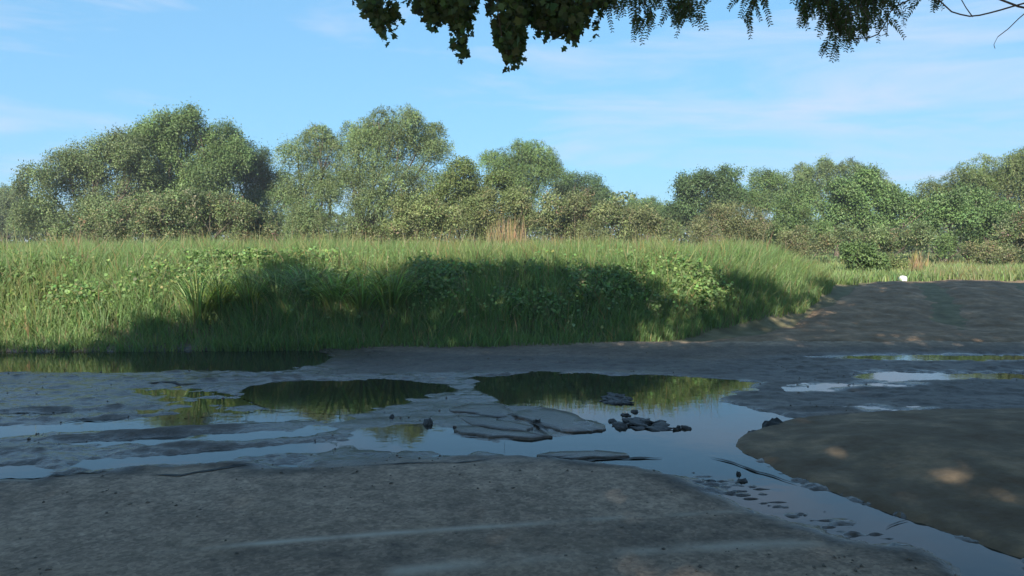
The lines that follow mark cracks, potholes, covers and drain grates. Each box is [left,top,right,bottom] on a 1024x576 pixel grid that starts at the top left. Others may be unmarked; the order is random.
pothole [235,378,459,415]
pothole [337,424,505,457]
